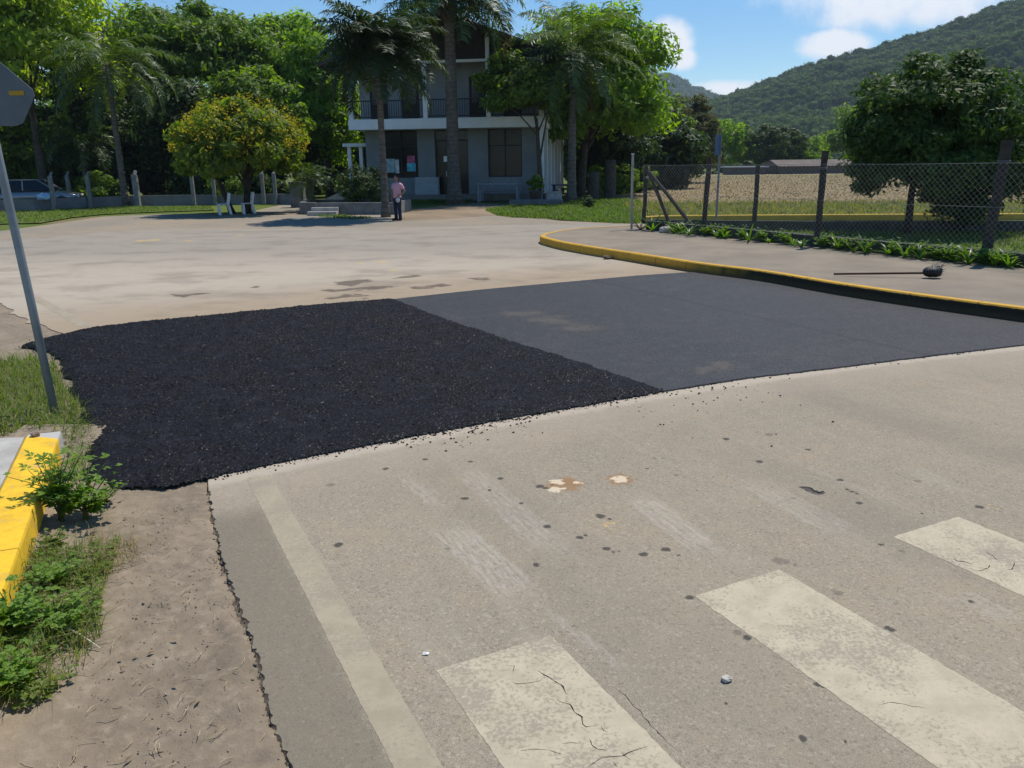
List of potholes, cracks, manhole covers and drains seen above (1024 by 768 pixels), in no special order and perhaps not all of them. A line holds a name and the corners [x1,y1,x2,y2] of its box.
crack [509,665,647,767]
crack [207,491,293,768]
